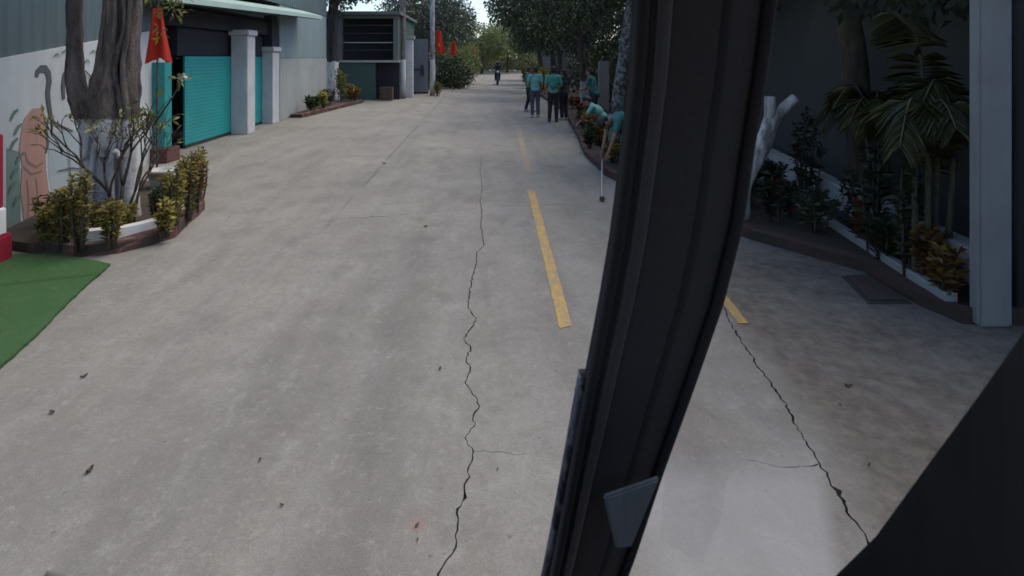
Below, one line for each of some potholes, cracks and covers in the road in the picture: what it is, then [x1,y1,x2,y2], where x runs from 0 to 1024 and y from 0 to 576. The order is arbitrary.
crack [725,309,869,545]
crack [437,154,521,576]
